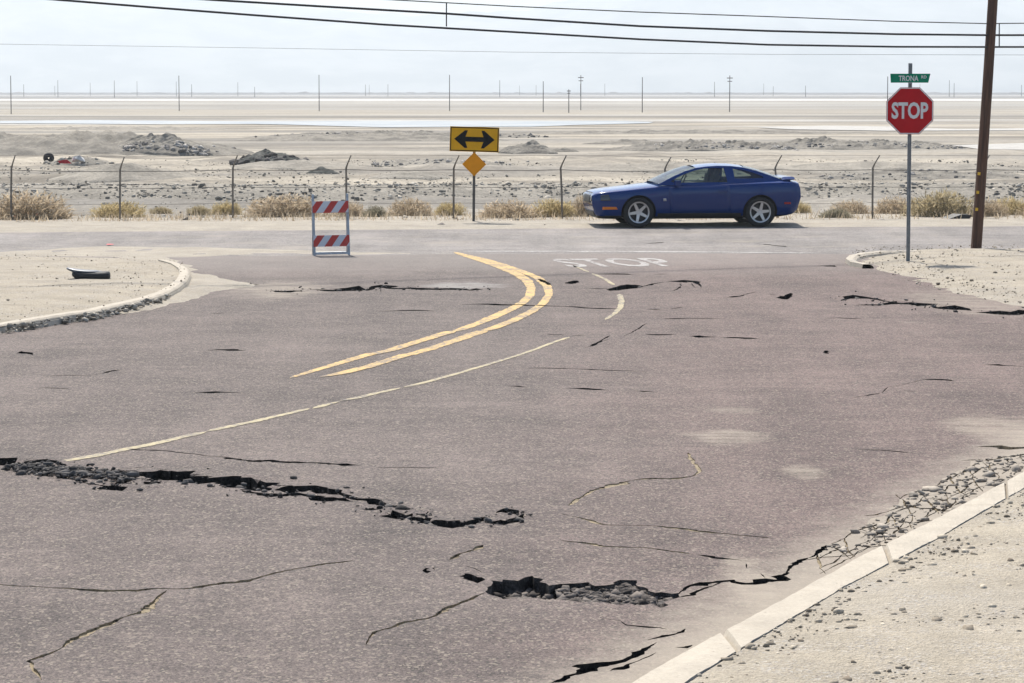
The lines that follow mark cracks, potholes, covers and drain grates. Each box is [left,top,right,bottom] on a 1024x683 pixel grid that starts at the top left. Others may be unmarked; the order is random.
crack [842,295,1024,319]
pothole [485,576,680,608]
crack [589,280,757,347]
crack [274,285,612,309]
crack [366,593,484,645]
crack [554,445,1024,597]
crack [0,560,354,680]
crack [552,618,685,683]
crack [0,449,524,528]
